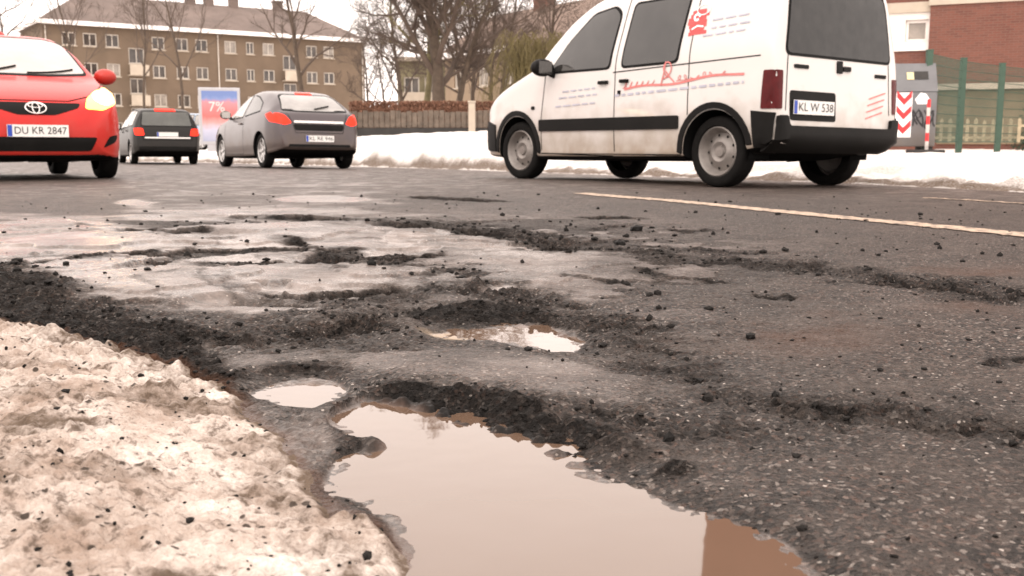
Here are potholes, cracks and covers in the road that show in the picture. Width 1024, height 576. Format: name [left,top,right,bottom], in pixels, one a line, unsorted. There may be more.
pothole [313,381,880,576]
pothole [403,300,624,360]
pothole [232,362,356,414]
pothole [346,237,450,258]
pothole [469,276,529,294]
pothole [190,253,297,263]
